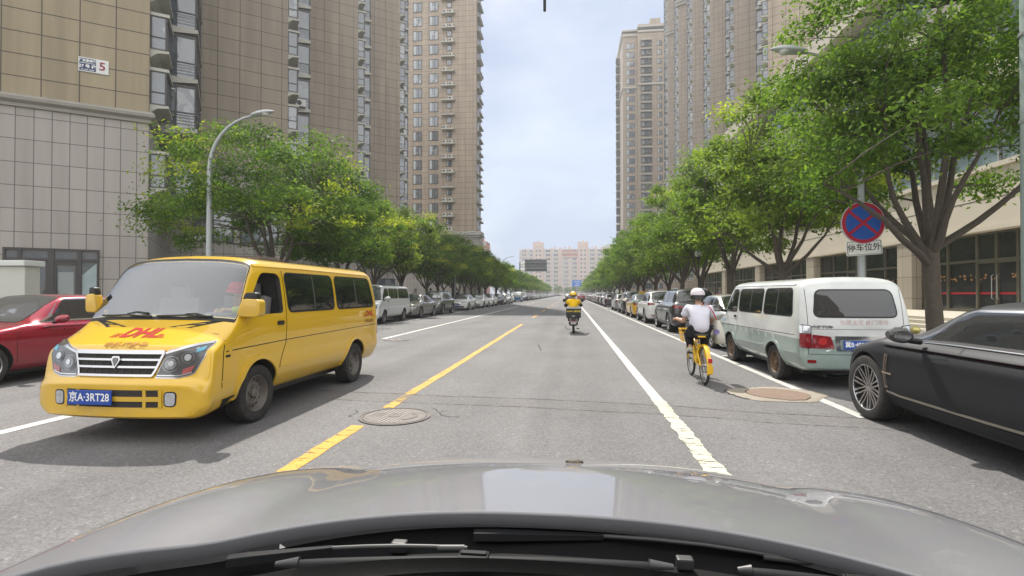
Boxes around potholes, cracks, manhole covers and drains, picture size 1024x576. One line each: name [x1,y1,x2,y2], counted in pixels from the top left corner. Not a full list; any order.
manhole cover [724,387,828,403]
manhole cover [358,408,431,425]
